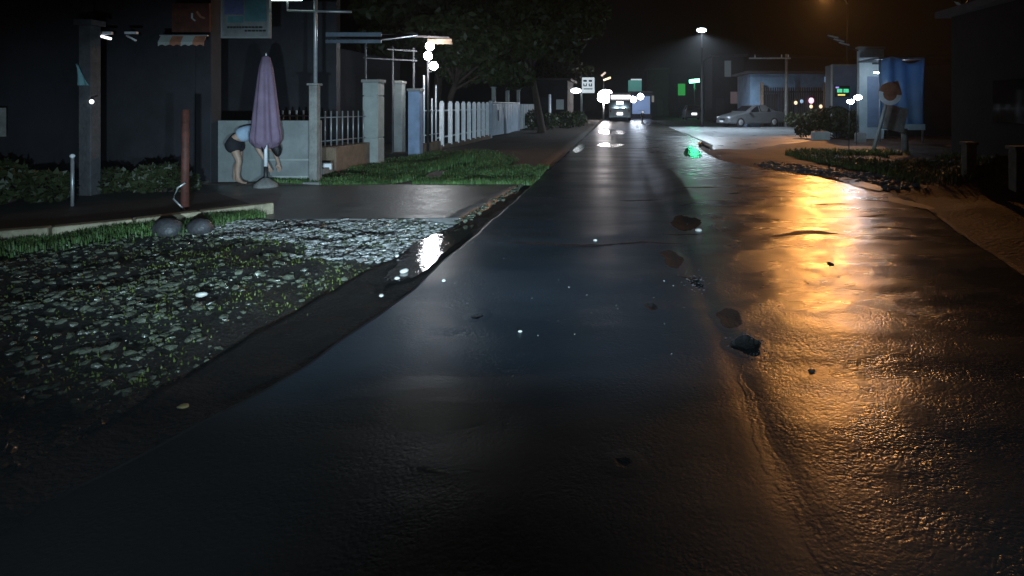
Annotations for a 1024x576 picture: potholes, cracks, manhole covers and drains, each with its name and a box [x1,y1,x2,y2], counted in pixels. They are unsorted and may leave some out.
pothole [665,214,707,233]
pothole [655,249,691,271]
pothole [720,331,771,361]
pothole [708,306,751,332]
